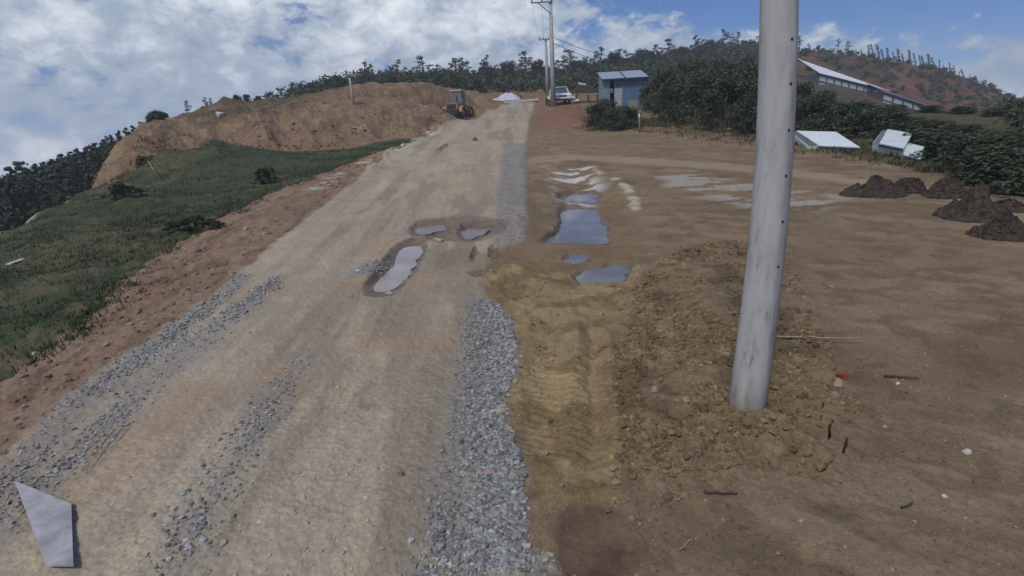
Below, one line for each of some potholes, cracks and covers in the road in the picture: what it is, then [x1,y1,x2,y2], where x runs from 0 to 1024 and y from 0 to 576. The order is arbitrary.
pothole [452,220,507,242]
pothole [558,252,595,265]
pothole [407,219,458,241]
pothole [553,189,604,204]
pothole [567,260,639,286]
pothole [536,202,615,247]
crack [81,425,132,475]
pothole [360,235,429,298]
